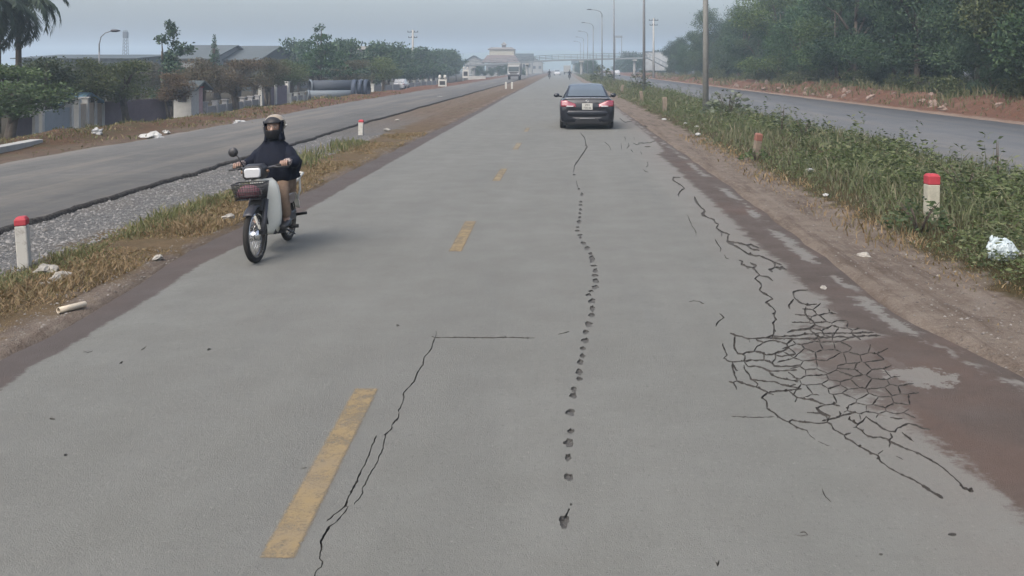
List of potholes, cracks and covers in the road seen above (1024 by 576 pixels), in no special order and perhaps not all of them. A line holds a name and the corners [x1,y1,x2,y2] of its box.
crack [303,331,569,576]
crack [672,177,974,502]
pothole [559,508,570,529]
